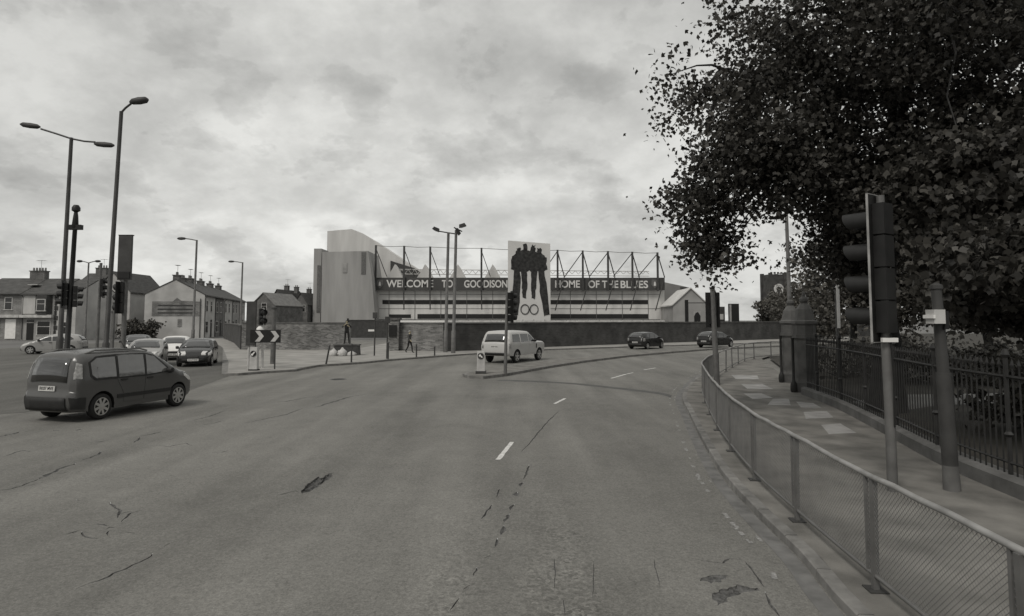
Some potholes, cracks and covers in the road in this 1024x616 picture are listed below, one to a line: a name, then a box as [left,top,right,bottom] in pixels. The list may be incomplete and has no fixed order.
pothole [712,584,759,605]
crack [0,432,102,490]
crack [76,543,170,589]
pothole [281,473,333,495]
crack [693,558,780,616]
pothole [700,575,728,583]
